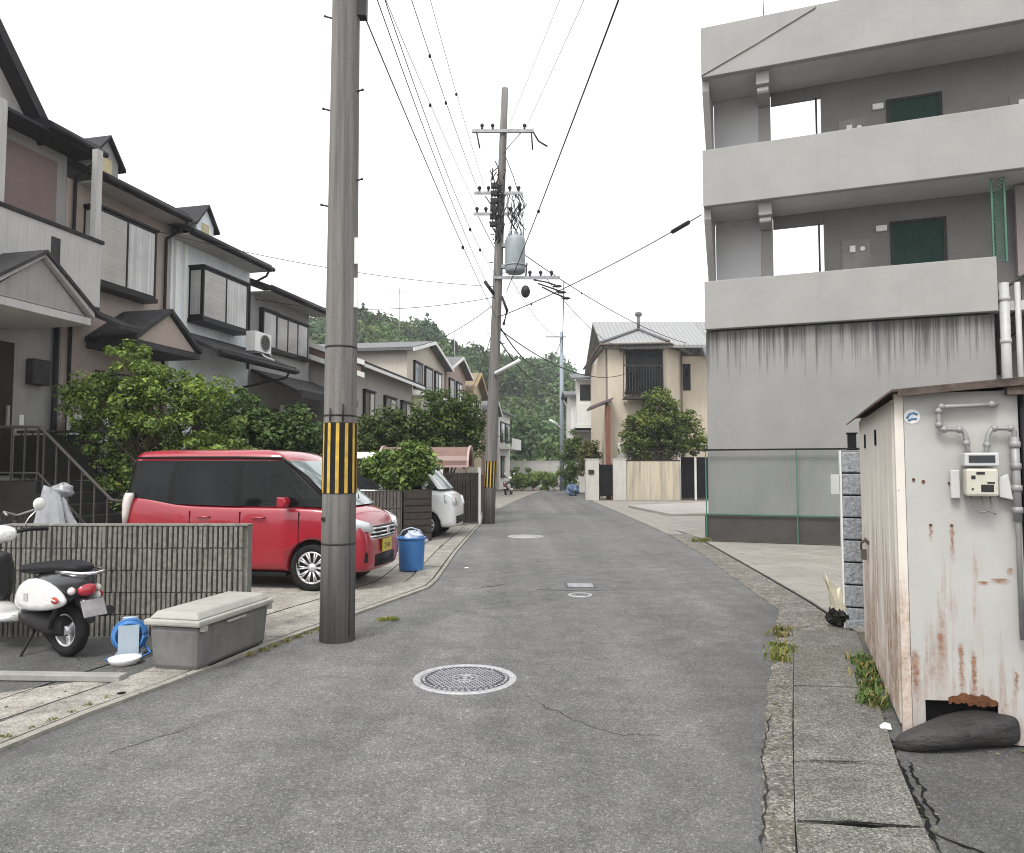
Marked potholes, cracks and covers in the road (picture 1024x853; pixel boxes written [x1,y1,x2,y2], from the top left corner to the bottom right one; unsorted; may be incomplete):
crack [798,738,984,853]
manhole cover [413,664,517,695]
crack [759,714,772,851]
